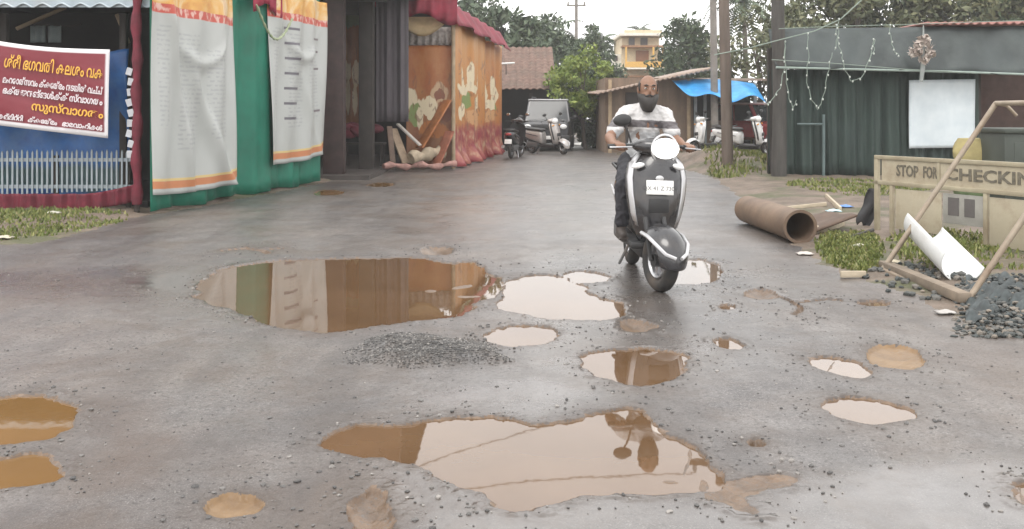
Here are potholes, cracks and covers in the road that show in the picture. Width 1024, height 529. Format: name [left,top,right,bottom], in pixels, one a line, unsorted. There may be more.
pothole [704,474,798,514]
pothole [866,344,927,370]
pothole [562,270,612,285]
pothole [712,337,744,350]
pothole [675,258,724,285]
pothole [747,439,766,447]
pothole [420,246,453,255]
pothole [0,393,82,445]
pothole [346,485,397,529]
pothole [494,274,626,321]
pothole [620,319,659,332]
pothole [579,347,691,386]
